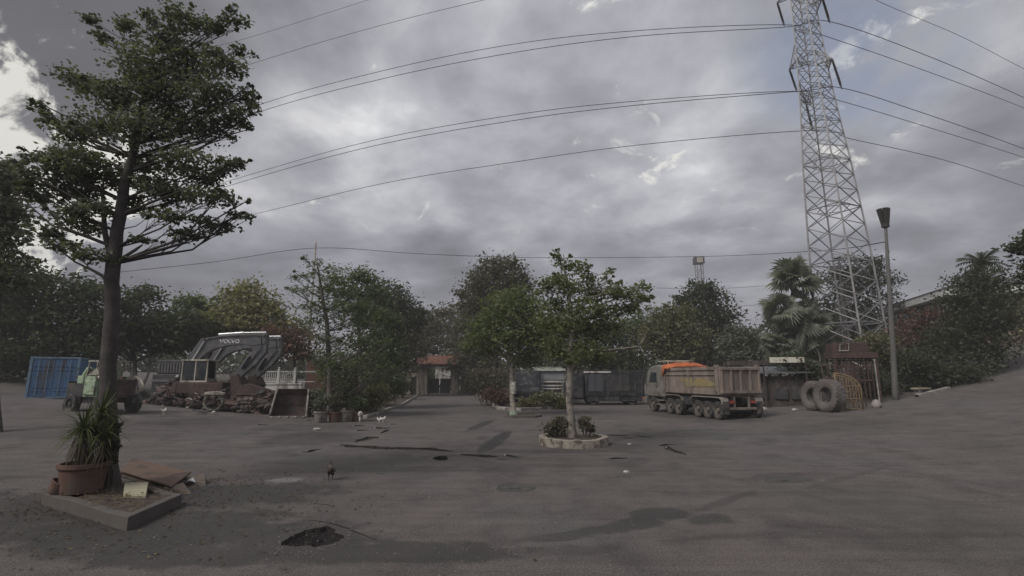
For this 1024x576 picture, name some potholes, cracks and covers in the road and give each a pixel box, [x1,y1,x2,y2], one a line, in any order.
pothole [281,526,344,547]
crack [606,434,687,455]
